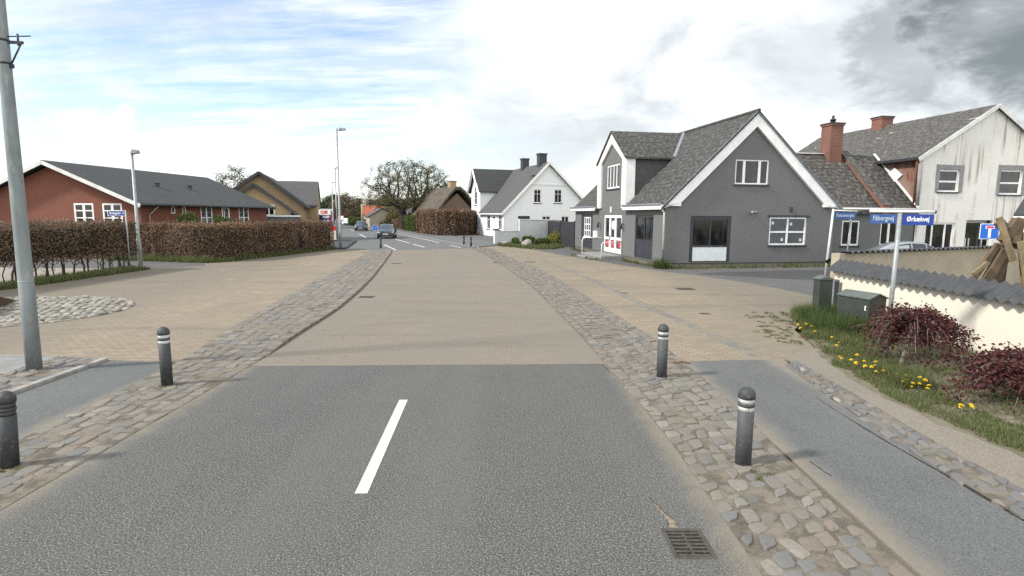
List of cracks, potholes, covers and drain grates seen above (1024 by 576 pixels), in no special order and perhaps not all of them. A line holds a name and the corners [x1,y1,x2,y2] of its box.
drain grate [661,528,718,559]
crack [650,498,678,528]
